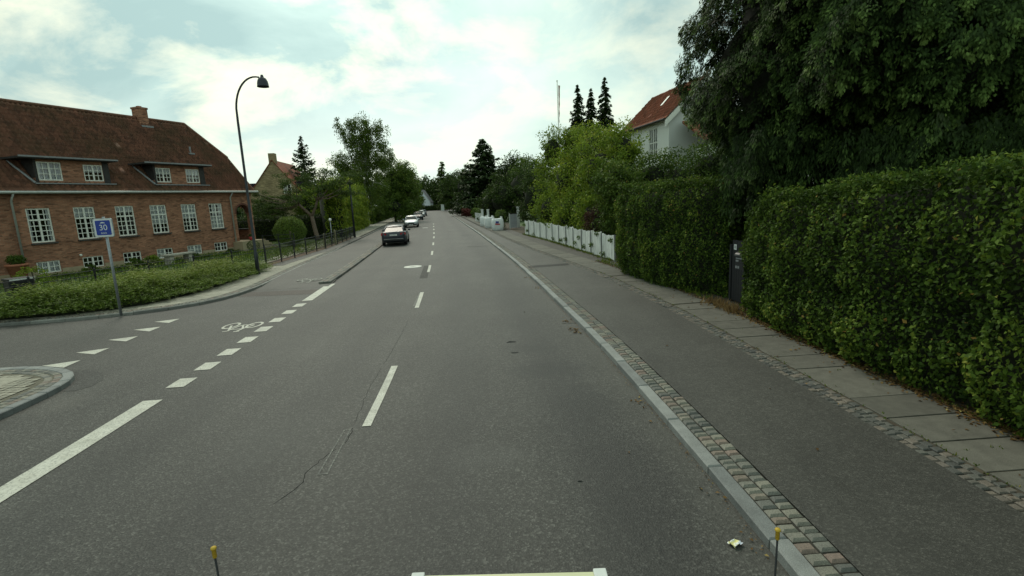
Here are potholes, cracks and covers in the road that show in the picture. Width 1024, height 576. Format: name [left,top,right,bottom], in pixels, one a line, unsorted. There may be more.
crack [274,428,353,504]
